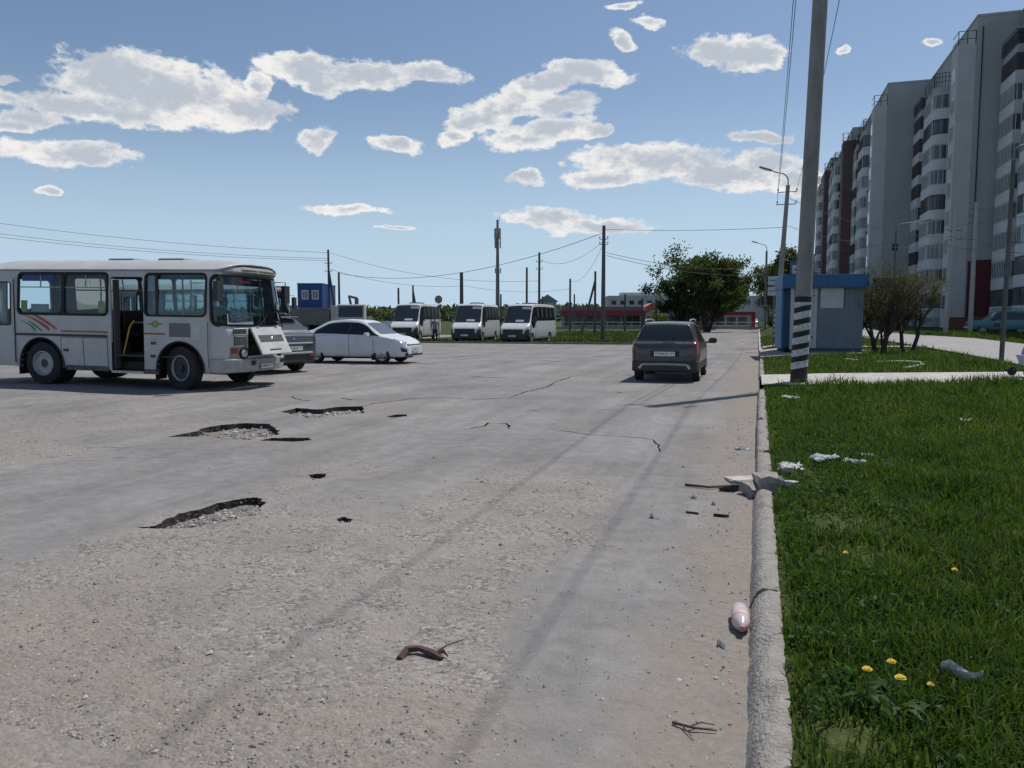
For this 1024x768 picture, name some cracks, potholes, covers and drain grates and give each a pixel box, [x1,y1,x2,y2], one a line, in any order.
crack [342,360,573,411]
pothole [282,406,364,418]
pothole [170,423,281,440]
pothole [138,497,266,529]
